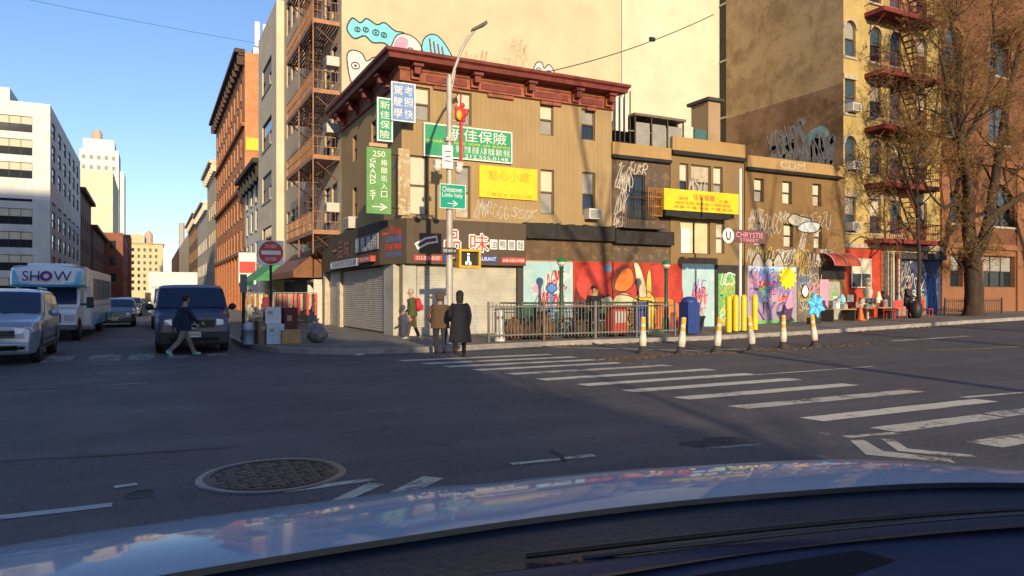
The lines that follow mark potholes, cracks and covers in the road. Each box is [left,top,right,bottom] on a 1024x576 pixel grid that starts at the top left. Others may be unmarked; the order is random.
pothole [123,489,157,498]
manhole cover [195,458,346,494]
crack [549,449,568,461]
